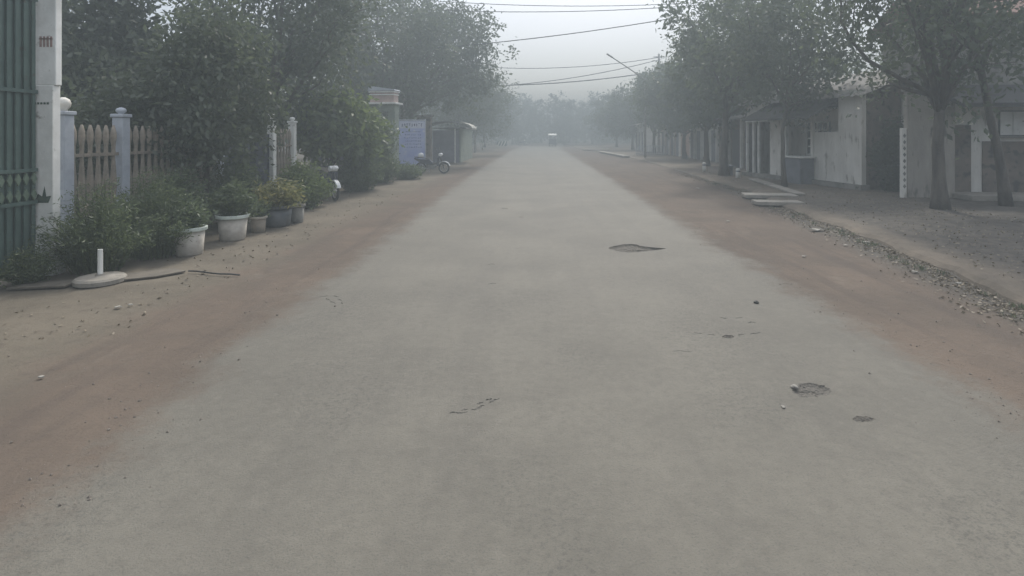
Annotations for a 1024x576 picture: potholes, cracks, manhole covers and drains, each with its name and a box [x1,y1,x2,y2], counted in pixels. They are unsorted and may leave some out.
pothole [792,383,832,398]
crack [450,398,499,414]
pothole [608,244,665,253]
